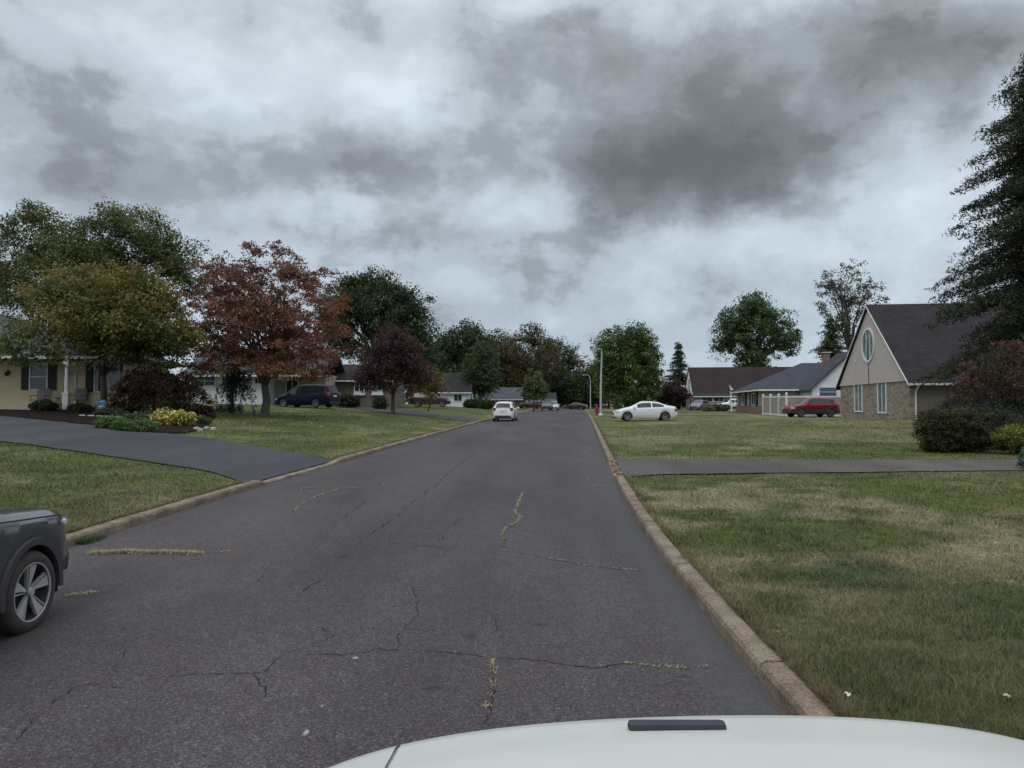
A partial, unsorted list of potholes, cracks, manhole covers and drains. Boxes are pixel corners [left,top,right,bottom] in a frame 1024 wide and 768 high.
crack [86,548,231,556]
crack [146,577,740,723]
crack [394,478,644,571]
crack [303,456,472,592]
